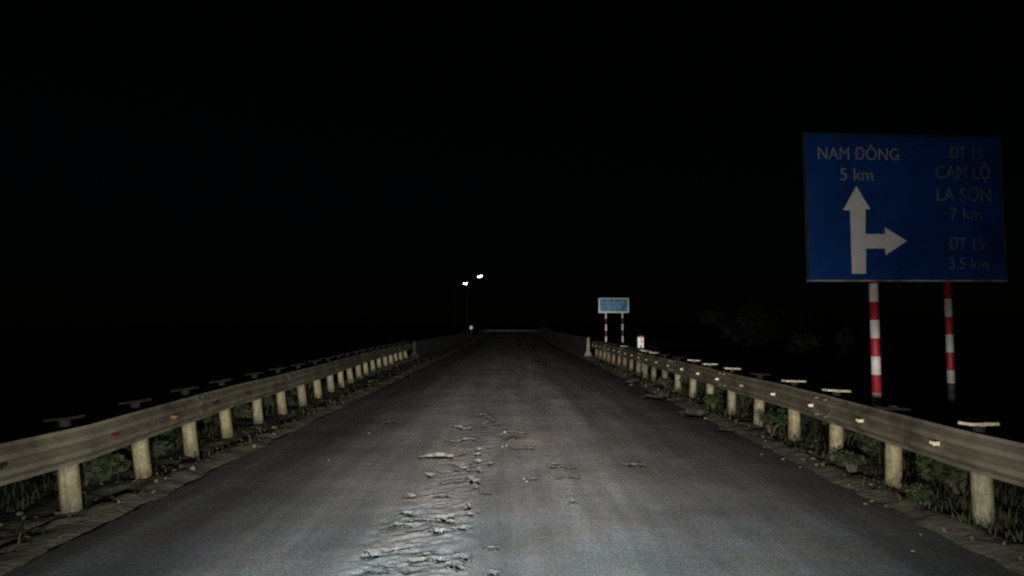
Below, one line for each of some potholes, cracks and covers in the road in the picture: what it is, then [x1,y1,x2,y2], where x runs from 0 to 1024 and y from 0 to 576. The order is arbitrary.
pothole [416,452,457,460]
pothole [491,430,530,440]
